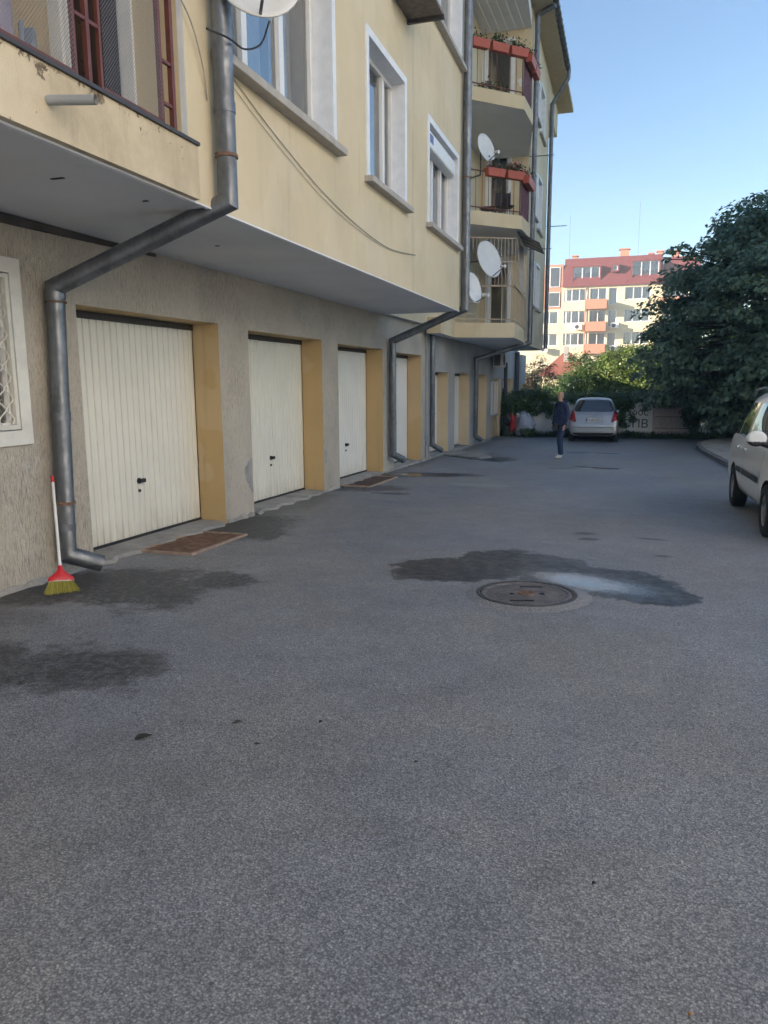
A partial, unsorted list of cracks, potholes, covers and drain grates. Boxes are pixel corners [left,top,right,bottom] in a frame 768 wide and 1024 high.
manhole cover [465,580,593,613]
